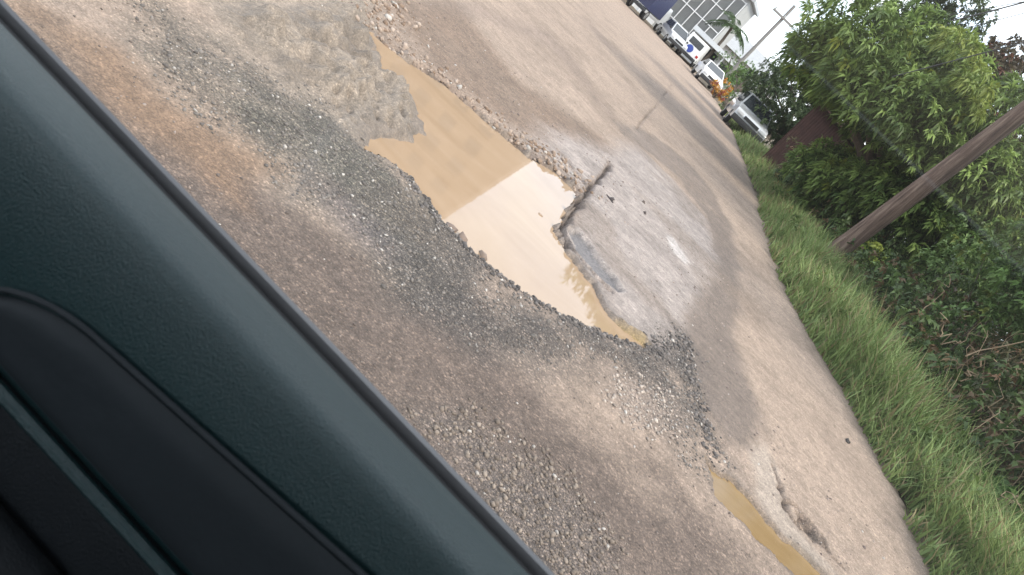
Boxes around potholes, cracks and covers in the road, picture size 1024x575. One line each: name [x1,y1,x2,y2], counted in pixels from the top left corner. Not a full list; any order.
pothole [696,445,831,575]
pothole [348,19,669,361]
crack [767,459,852,575]
